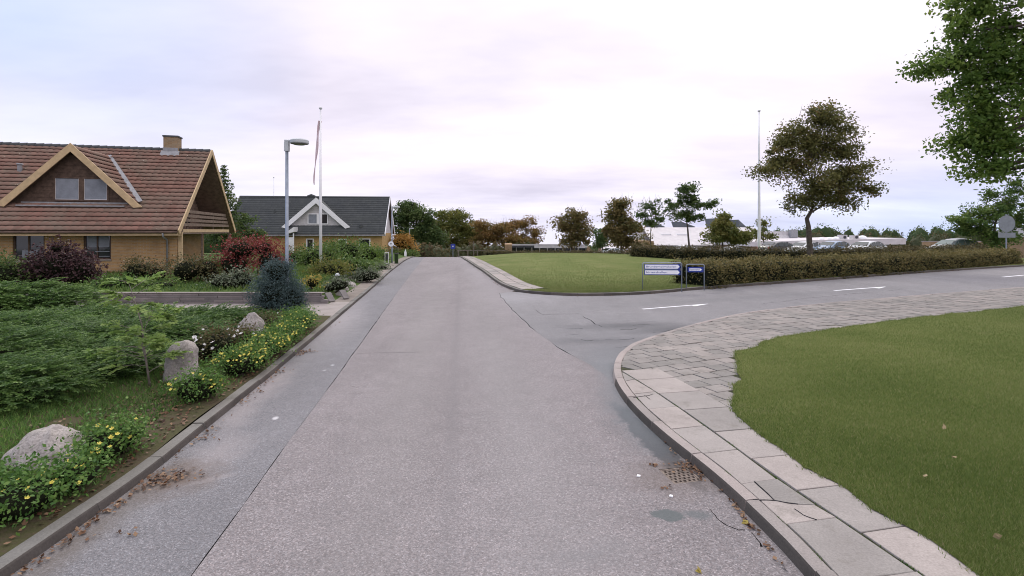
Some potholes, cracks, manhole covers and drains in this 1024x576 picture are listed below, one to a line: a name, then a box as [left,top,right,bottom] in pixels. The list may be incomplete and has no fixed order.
crack [753,481,817,520]
drain grate [660,467,703,484]
